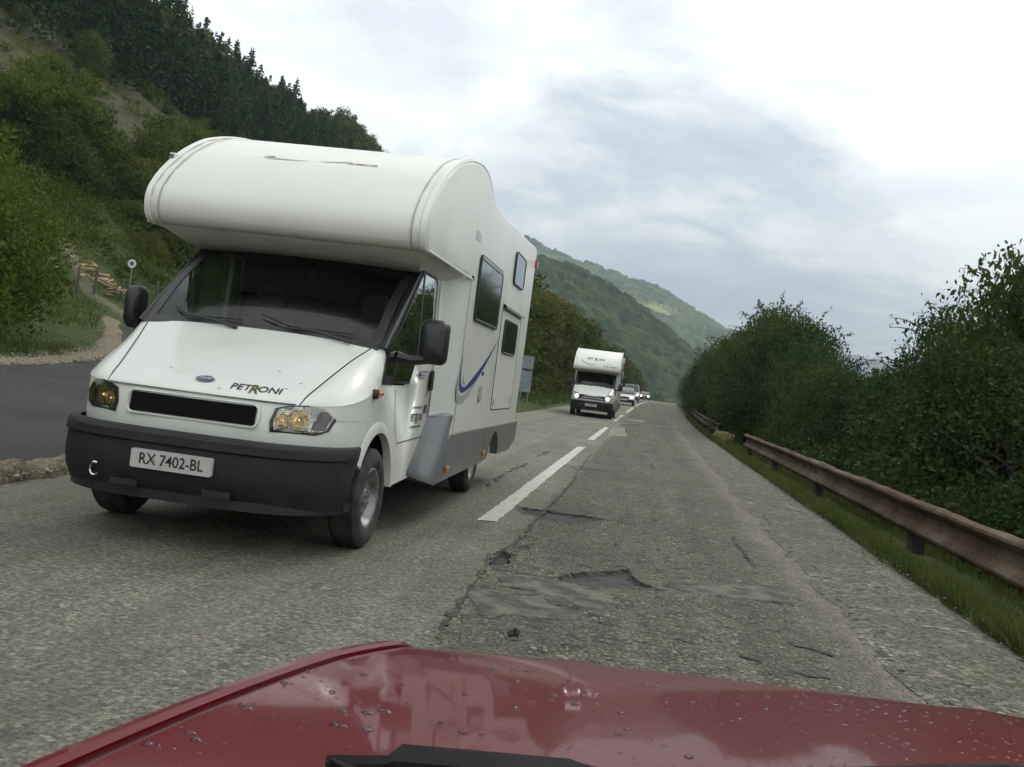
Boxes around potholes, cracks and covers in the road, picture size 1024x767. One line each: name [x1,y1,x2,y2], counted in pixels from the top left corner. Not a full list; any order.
pothole [482,550,516,567]
crack [731,537,756,567]
crack [486,449,552,486]
pothole [516,506,608,525]
crack [786,641,839,681]
pothole [501,628,525,640]
pothole [548,568,663,591]
